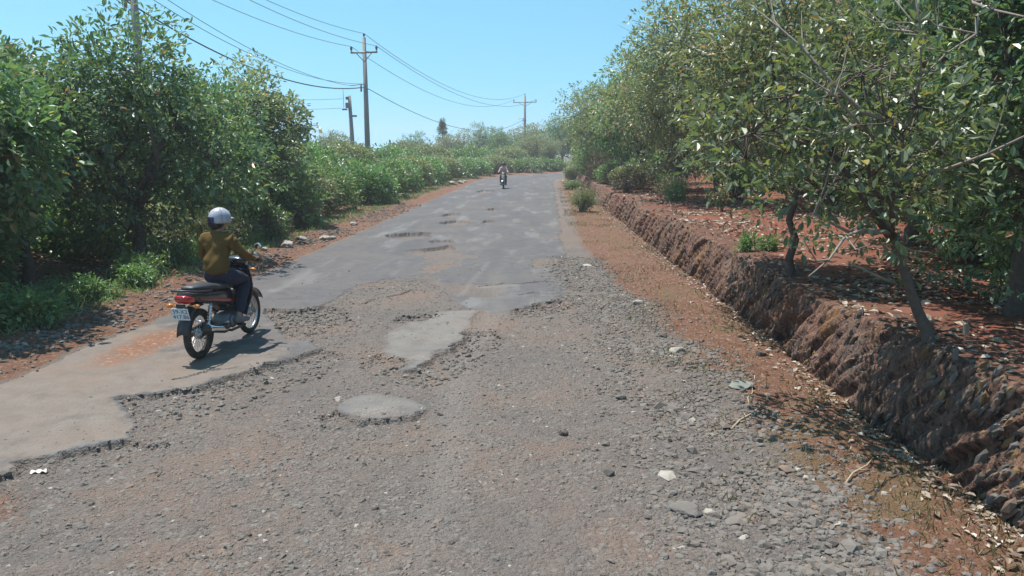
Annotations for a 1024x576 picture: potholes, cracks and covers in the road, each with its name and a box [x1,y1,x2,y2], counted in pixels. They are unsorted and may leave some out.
pothole [391,312,441,324]
pothole [389,244,460,258]
pothole [435,219,474,227]
pothole [381,232,437,240]
